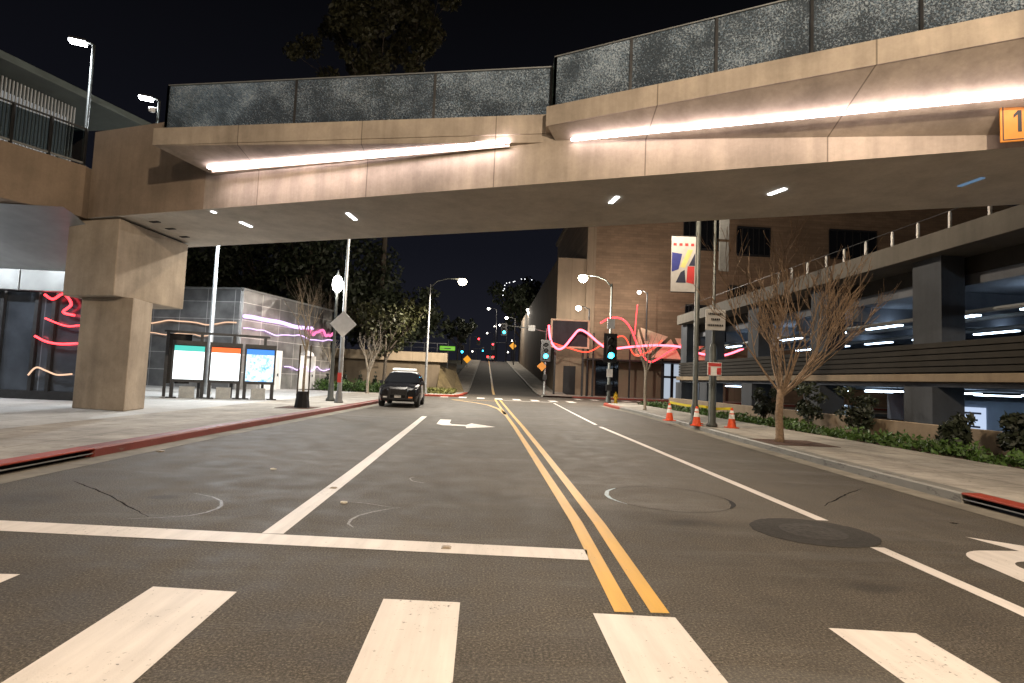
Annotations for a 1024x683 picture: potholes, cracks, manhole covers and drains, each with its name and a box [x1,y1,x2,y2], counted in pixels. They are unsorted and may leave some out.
crack [74,481,148,517]
manhole cover [749,518,882,548]
drain grate [0,447,95,474]
drain grate [961,493,1024,518]
